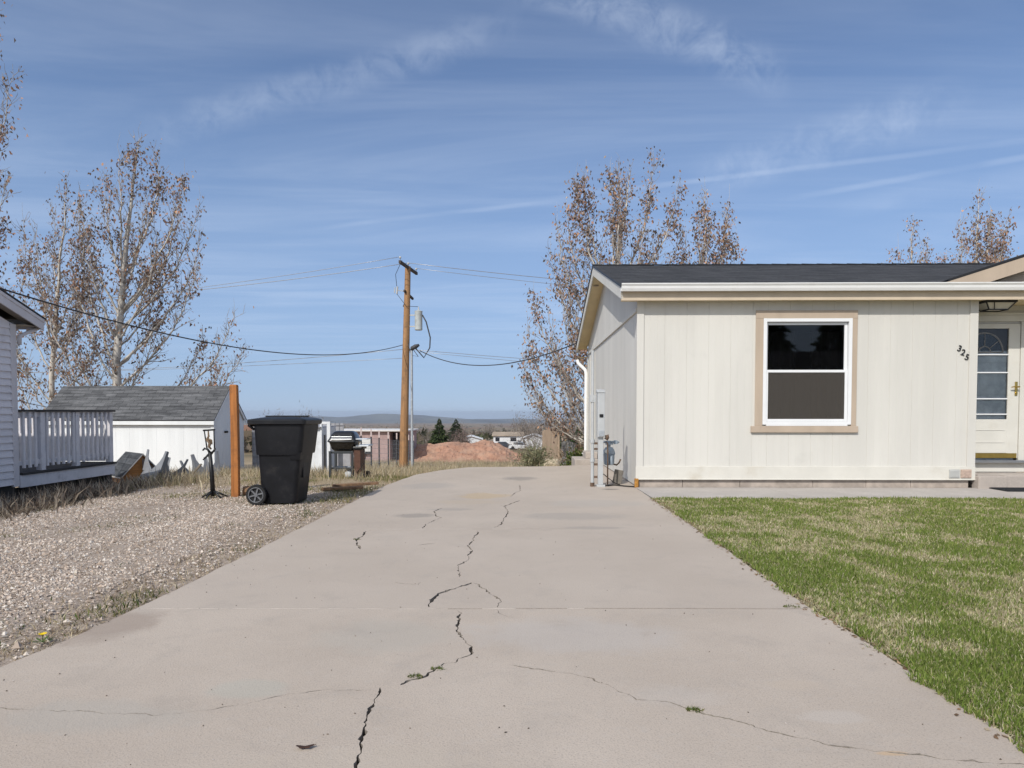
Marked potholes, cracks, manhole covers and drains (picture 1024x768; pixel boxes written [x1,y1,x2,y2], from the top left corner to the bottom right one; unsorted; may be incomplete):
crack [395,532,508,685]
crack [509,664,1024,765]
crack [1,688,381,768]
